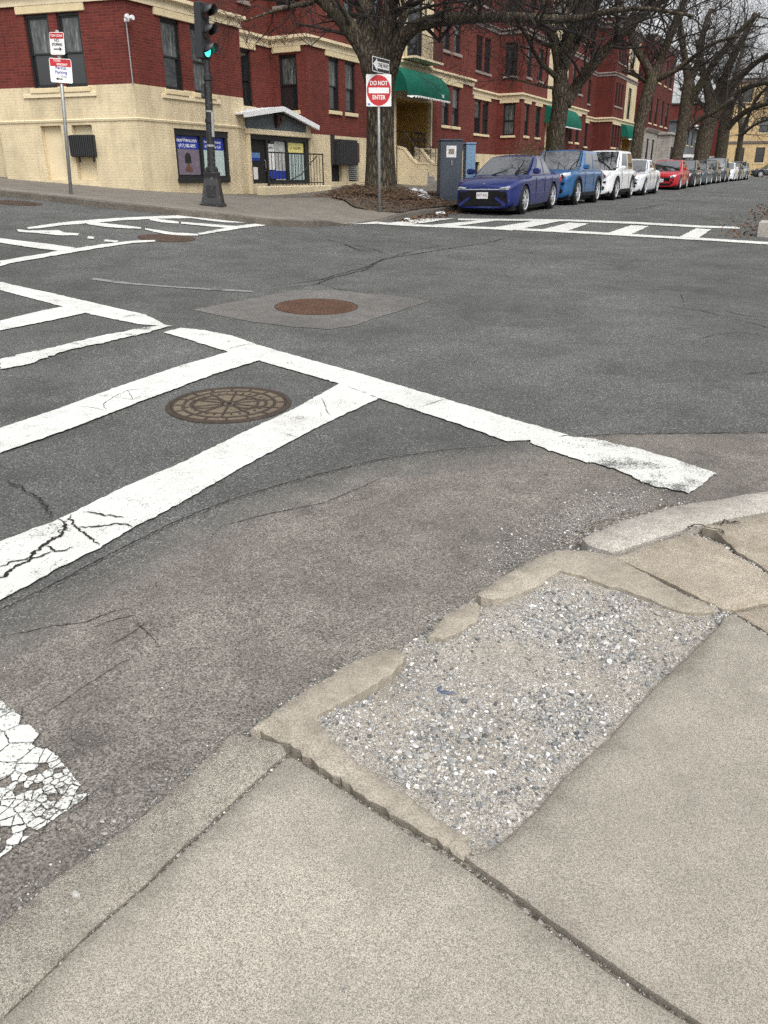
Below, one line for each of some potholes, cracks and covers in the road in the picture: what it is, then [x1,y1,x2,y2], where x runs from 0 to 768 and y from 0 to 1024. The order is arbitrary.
manhole cover [138,234,195,242]
crack [206,470,398,542]
manhole cover [166,387,292,424]
crack [0,607,159,854]
crack [0,478,133,578]
manhole cover [274,298,358,315]
crack [660,519,768,575]
crack [270,238,504,294]
